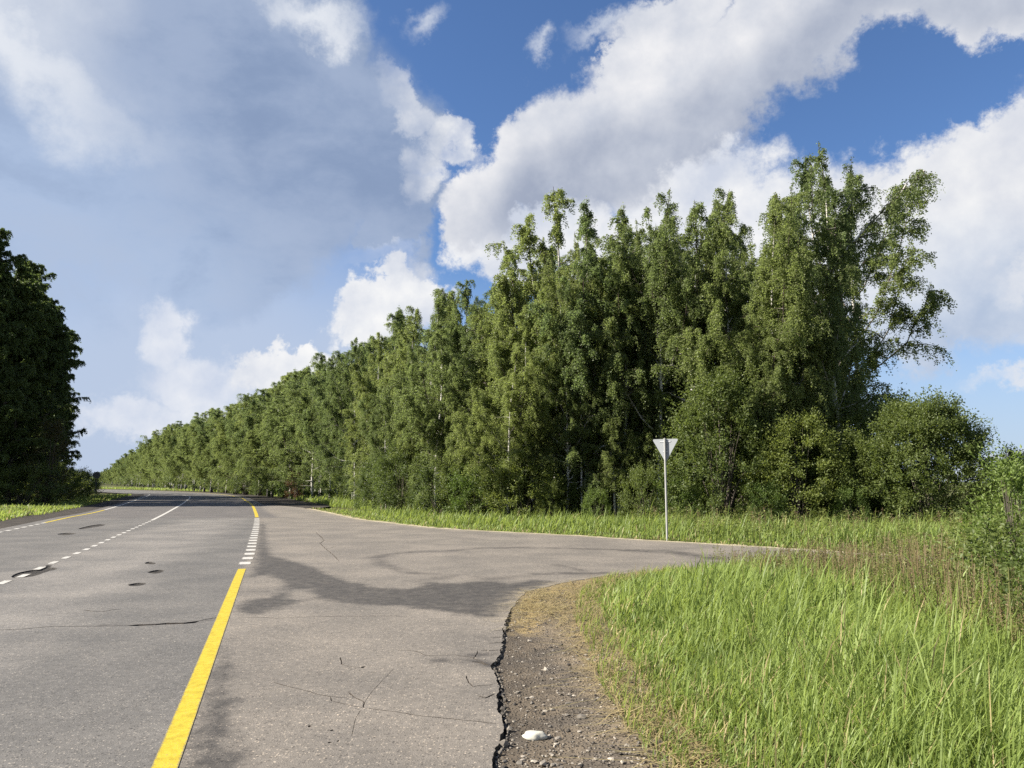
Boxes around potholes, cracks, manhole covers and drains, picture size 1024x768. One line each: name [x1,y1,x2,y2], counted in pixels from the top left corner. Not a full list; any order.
crack [276,615,512,768]
pothole [11,565,57,578]
crack [9,609,212,630]
